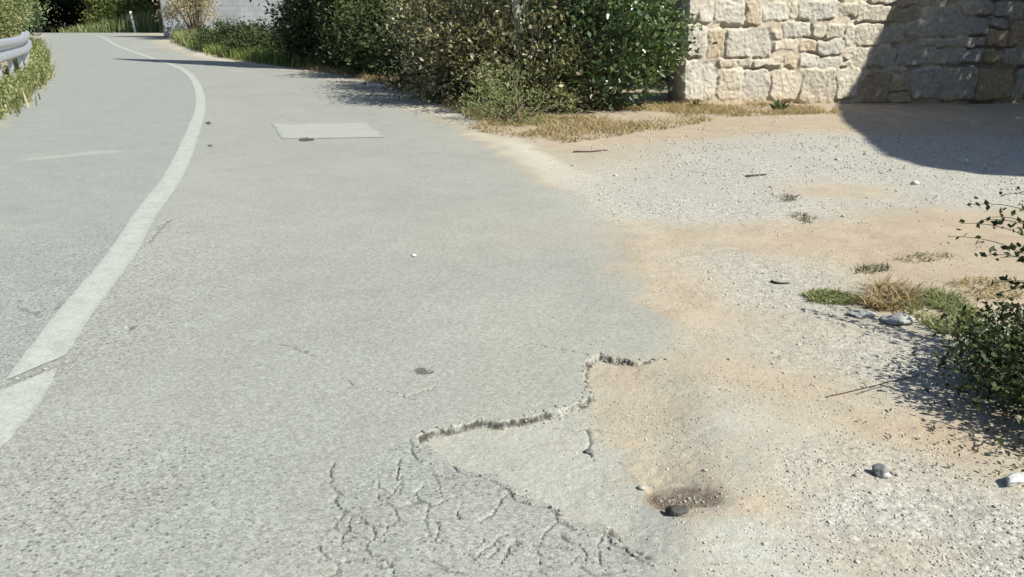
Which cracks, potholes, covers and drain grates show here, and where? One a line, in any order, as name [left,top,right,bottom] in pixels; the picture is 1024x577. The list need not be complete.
crack [339,377,436,400]
crack [314,438,654,577]
